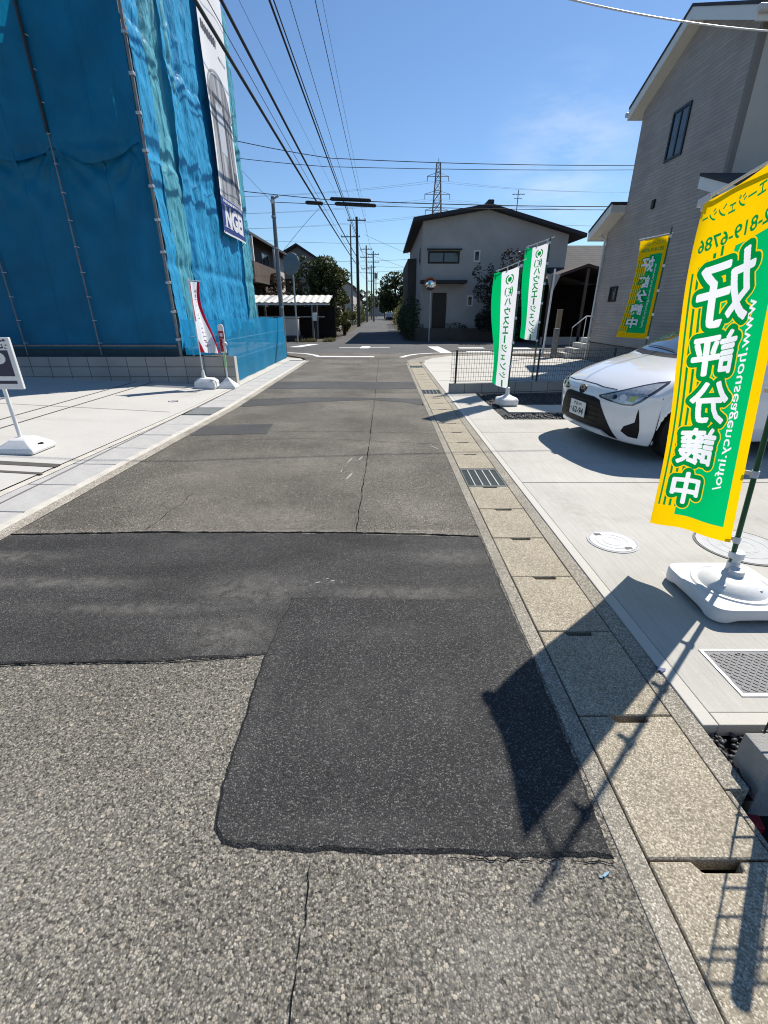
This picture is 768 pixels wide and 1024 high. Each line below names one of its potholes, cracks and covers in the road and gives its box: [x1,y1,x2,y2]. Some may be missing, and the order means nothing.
crack [218,362,436,528]
crack [289,866,310,1024]
drain grate [460,469,508,488]
manhole cover [587,531,639,553]
manhole cover [692,530,768,567]
